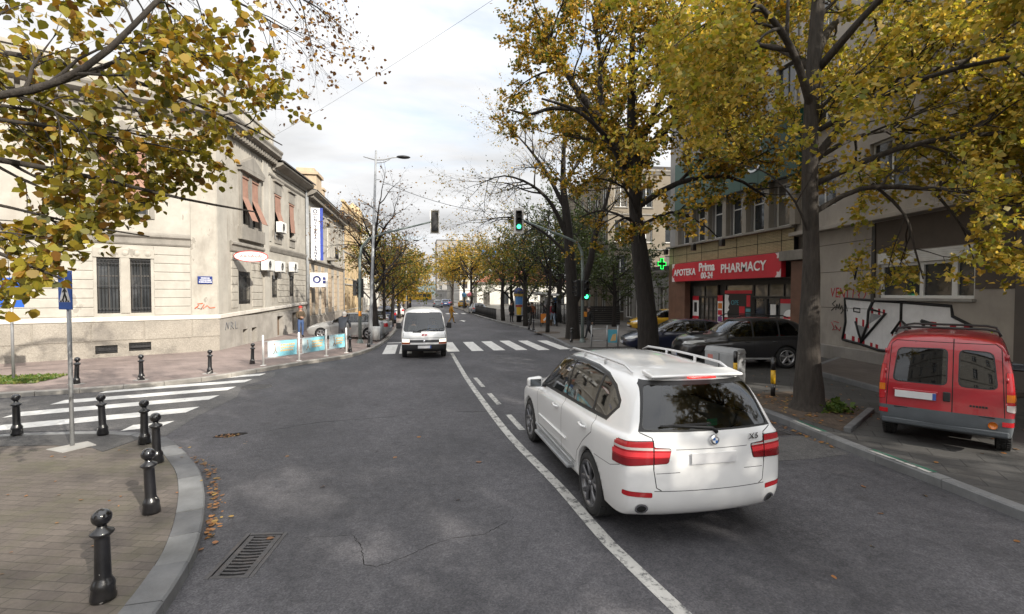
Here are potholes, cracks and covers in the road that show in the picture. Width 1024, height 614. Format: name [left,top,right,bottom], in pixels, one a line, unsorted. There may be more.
drain grate [203,532,288,580]
crack [316,512,518,567]
